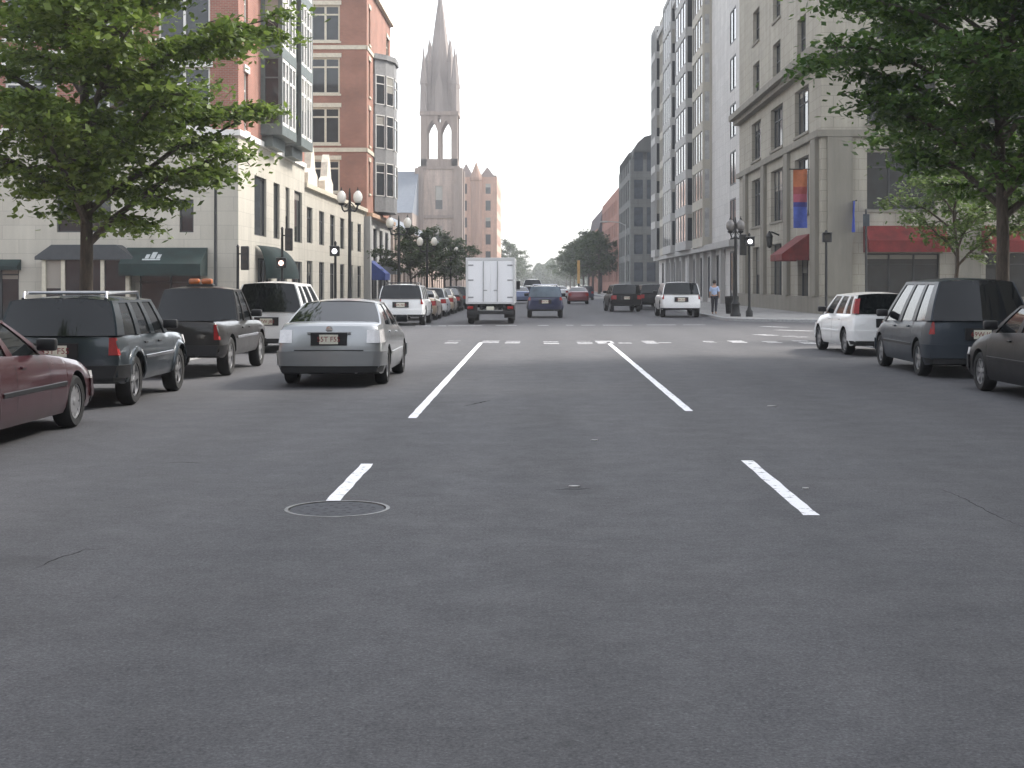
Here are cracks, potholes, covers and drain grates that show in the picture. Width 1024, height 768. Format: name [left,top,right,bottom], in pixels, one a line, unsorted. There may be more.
manhole cover [284,500,390,517]
